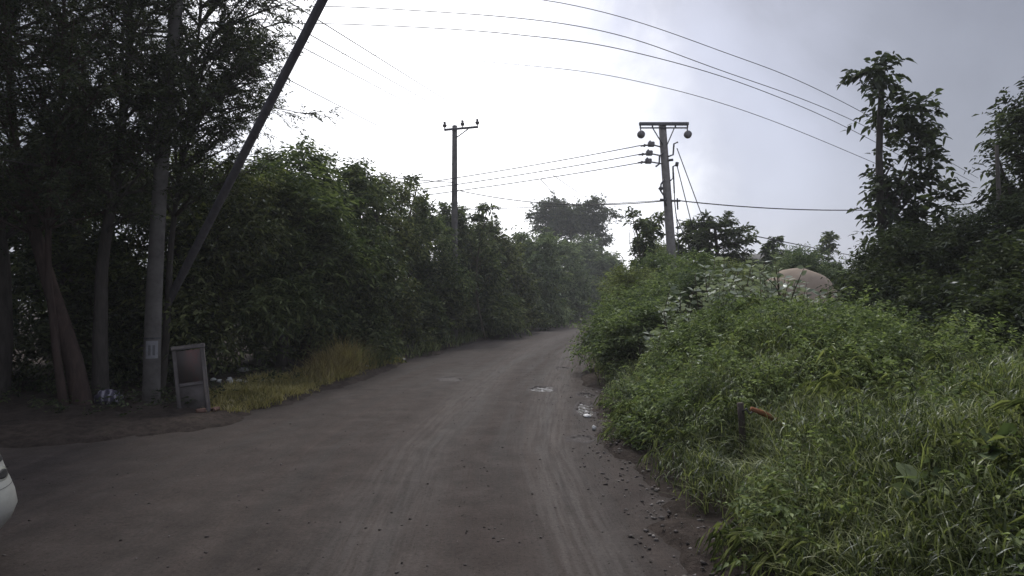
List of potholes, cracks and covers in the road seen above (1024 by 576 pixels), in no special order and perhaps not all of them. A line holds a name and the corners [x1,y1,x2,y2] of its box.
pothole [572,402,597,417]
